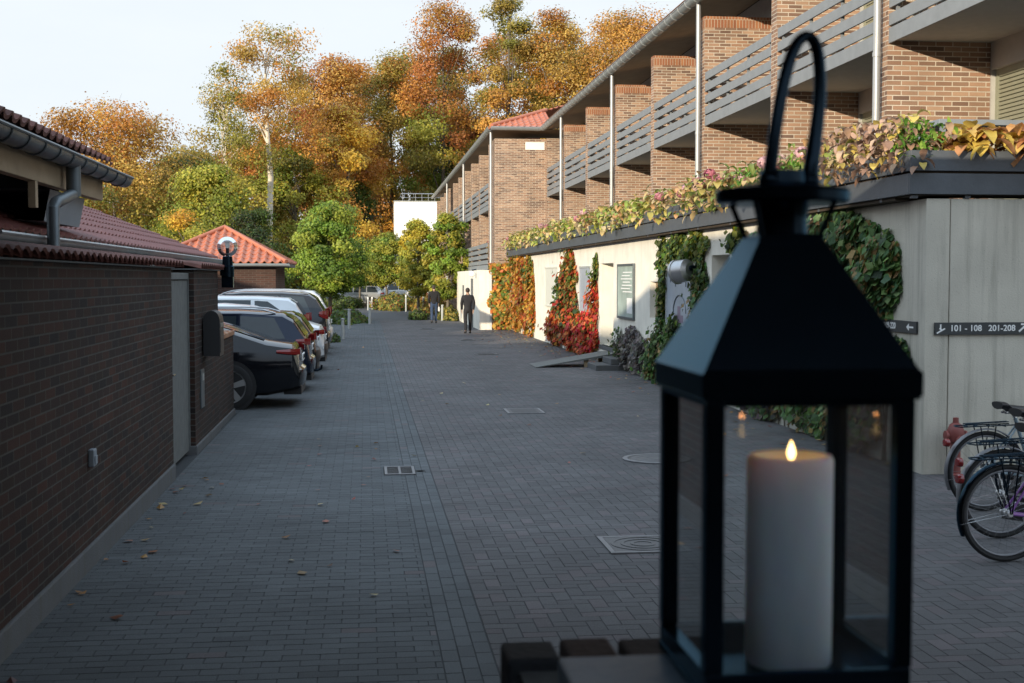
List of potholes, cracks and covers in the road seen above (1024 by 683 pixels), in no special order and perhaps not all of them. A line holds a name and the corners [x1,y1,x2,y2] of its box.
manhole cover [597,535,660,555]
manhole cover [622,454,660,464]
drain grate [384,466,416,476]
